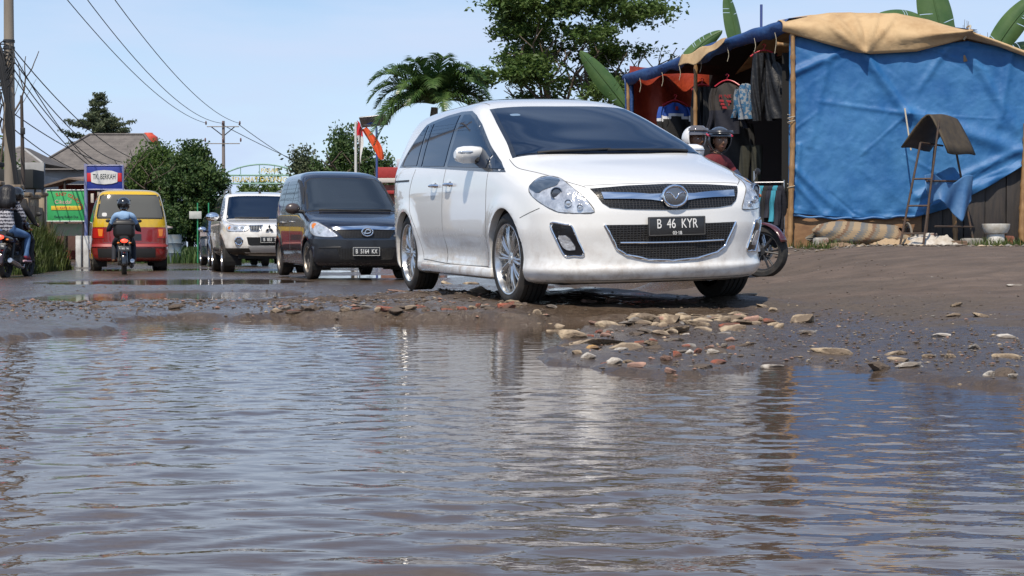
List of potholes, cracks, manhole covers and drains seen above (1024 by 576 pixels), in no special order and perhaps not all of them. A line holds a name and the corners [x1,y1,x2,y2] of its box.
pothole [0,310,1024,391]
pothole [3,288,337,302]
pothole [23,277,320,285]
